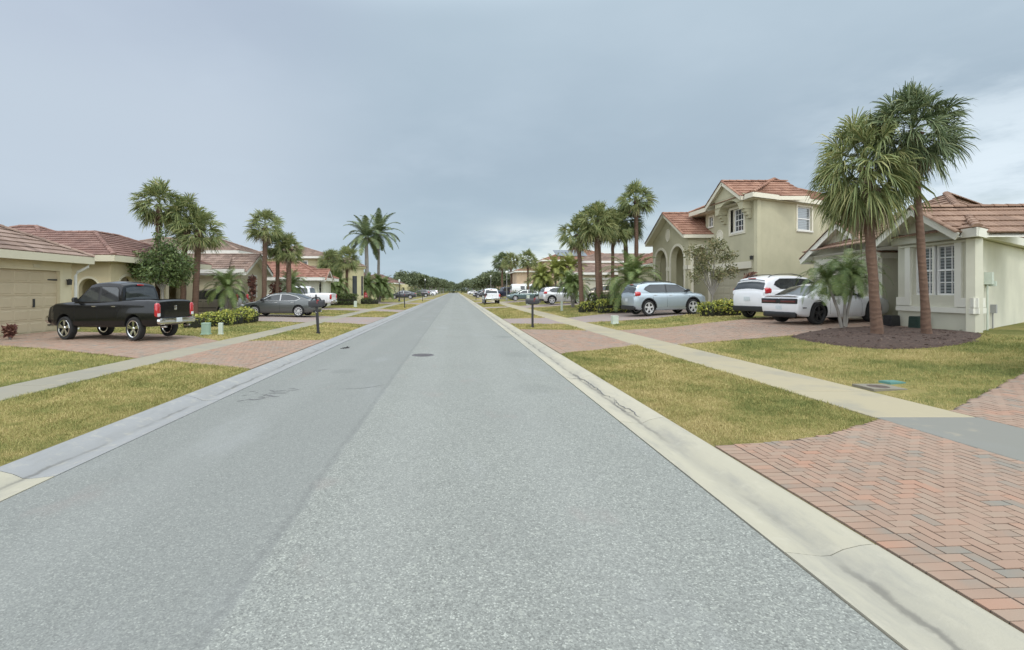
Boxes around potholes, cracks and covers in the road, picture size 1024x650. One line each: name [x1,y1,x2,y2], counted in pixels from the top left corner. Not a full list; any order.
crack [564,373,637,416]
